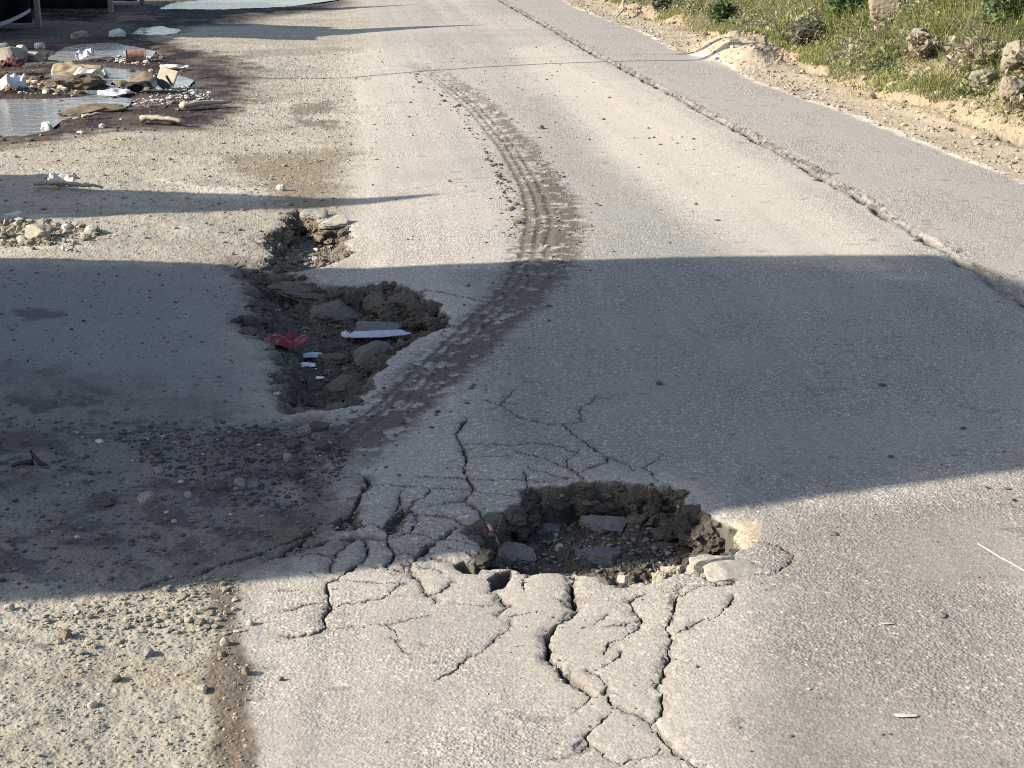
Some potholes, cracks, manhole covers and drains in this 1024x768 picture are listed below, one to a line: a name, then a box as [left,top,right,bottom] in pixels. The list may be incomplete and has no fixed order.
pothole [257,209,355,273]
pothole [453,560,485,575]
crack [435,576,710,768]
crack [755,555,795,575]
crack [495,397,531,420]
pothole [487,569,514,594]
crack [130,418,612,639]
crack [629,464,659,481]
pothole [458,479,744,586]
pothole [226,261,458,415]
